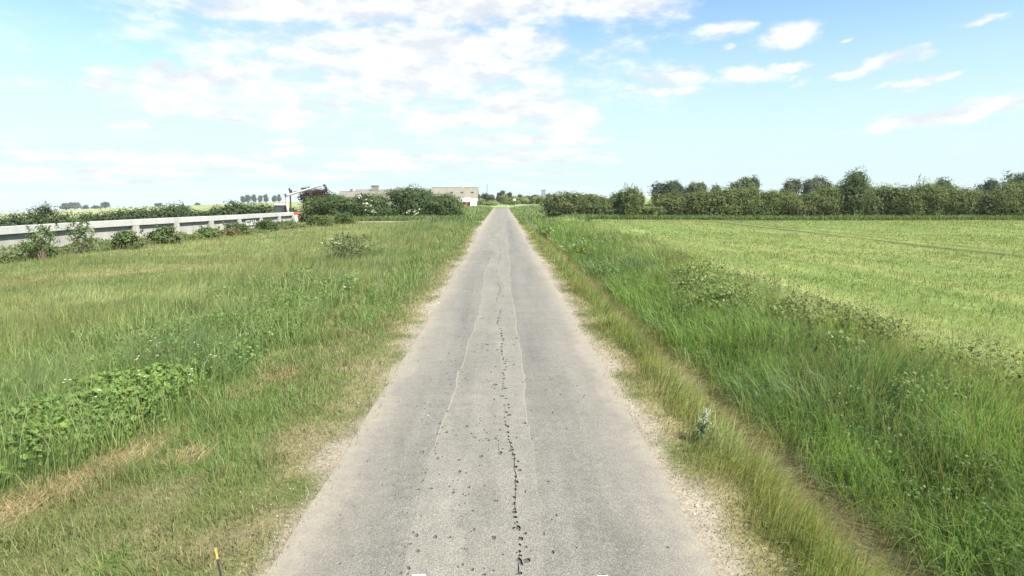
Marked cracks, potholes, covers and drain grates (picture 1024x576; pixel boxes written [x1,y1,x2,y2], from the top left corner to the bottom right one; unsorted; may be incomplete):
crack [496,254,530,575]
